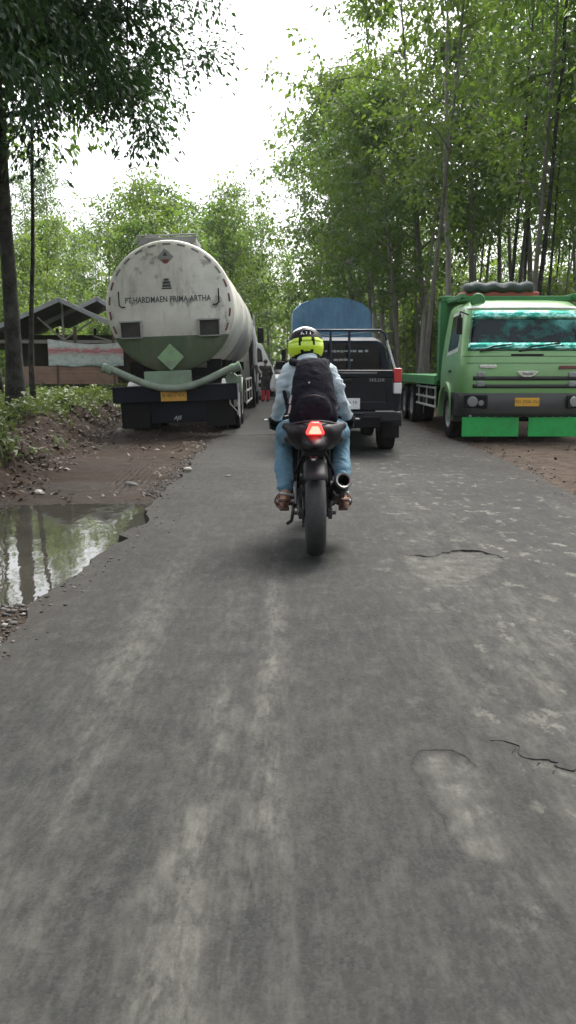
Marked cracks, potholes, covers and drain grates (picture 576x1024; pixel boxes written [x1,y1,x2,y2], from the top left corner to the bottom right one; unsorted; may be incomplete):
crack [490,740,576,783]
pothole [399,550,505,589]
pothole [410,749,520,868]
